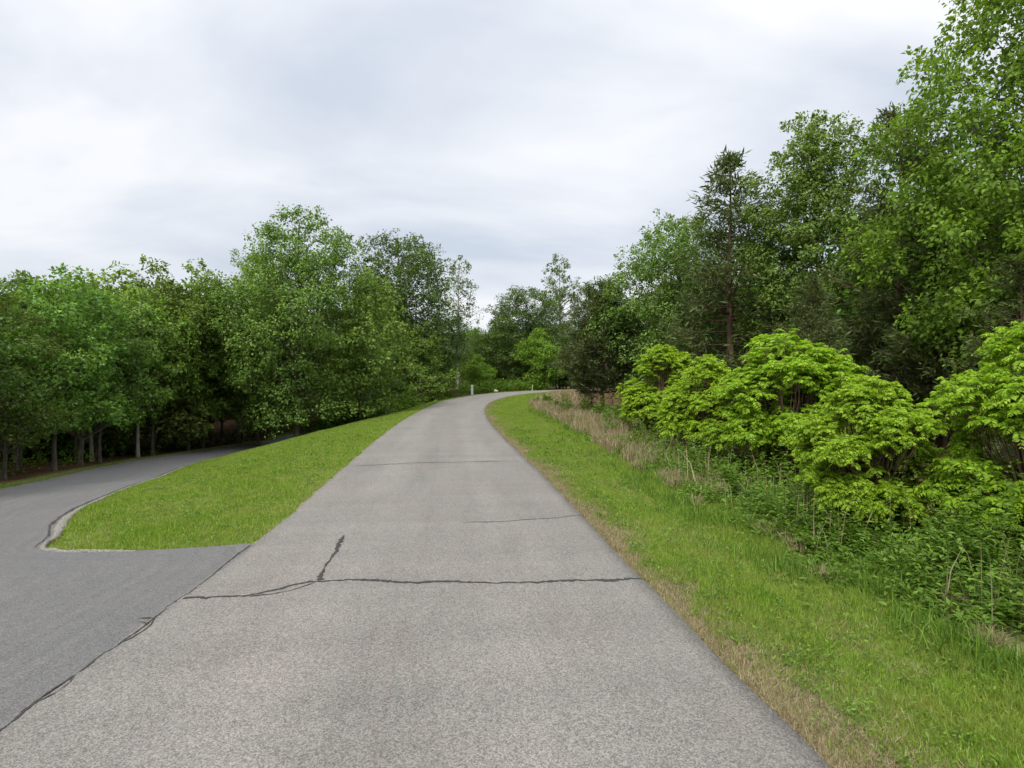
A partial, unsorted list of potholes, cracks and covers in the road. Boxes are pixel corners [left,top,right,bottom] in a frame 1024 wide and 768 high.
crack [183,535,642,599]
